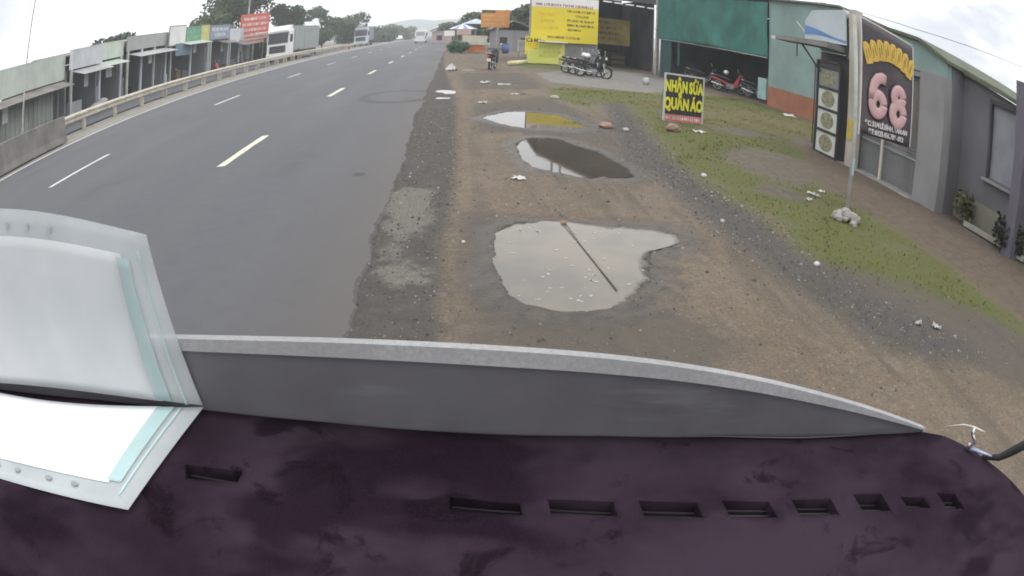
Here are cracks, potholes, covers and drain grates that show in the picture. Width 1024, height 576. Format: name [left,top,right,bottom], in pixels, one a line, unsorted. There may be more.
pothole [507,135,646,182]
pothole [473,217,694,323]
pothole [475,110,598,132]
